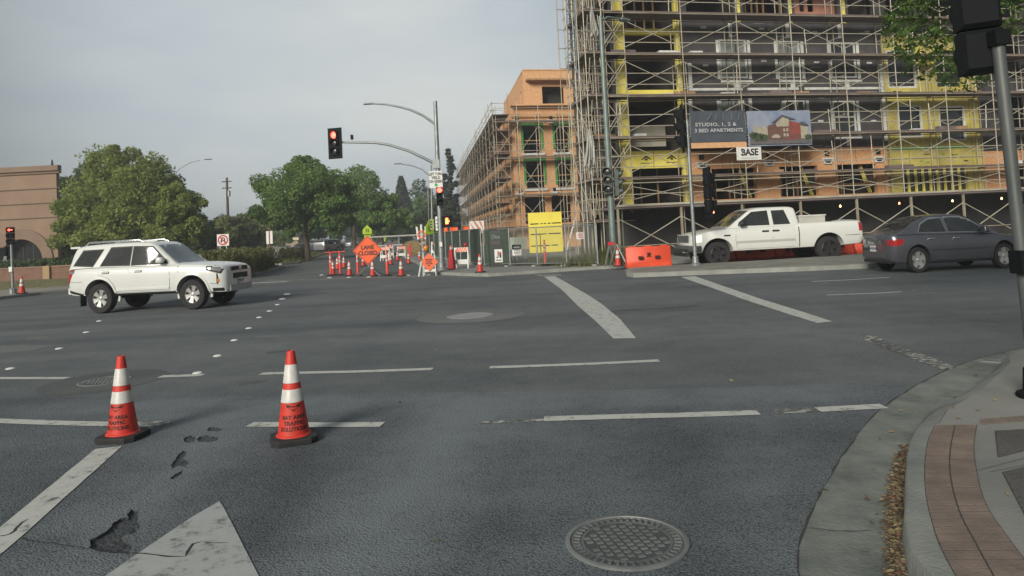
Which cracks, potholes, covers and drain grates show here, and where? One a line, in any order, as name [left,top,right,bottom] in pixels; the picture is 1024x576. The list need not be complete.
manhole cover [565,515,690,572]
manhole cover [416,309,524,323]
pothole [87,509,141,554]
pothole [171,450,190,468]
crack [0,519,227,557]
